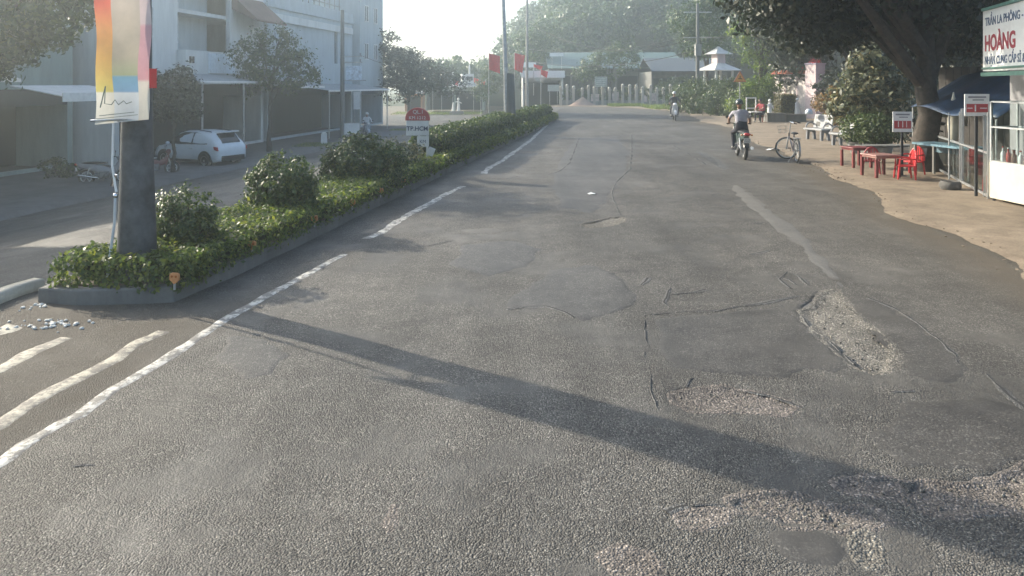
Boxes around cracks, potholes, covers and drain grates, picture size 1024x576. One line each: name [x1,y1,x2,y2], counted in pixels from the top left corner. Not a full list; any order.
crack [577,135,636,226]
pothole [666,384,800,418]
pothole [722,488,898,537]
pothole [796,289,903,375]
pothole [671,505,742,532]
crack [609,250,1024,411]
pothole [827,460,1024,521]
crack [548,139,580,175]
pothole [838,523,890,571]
